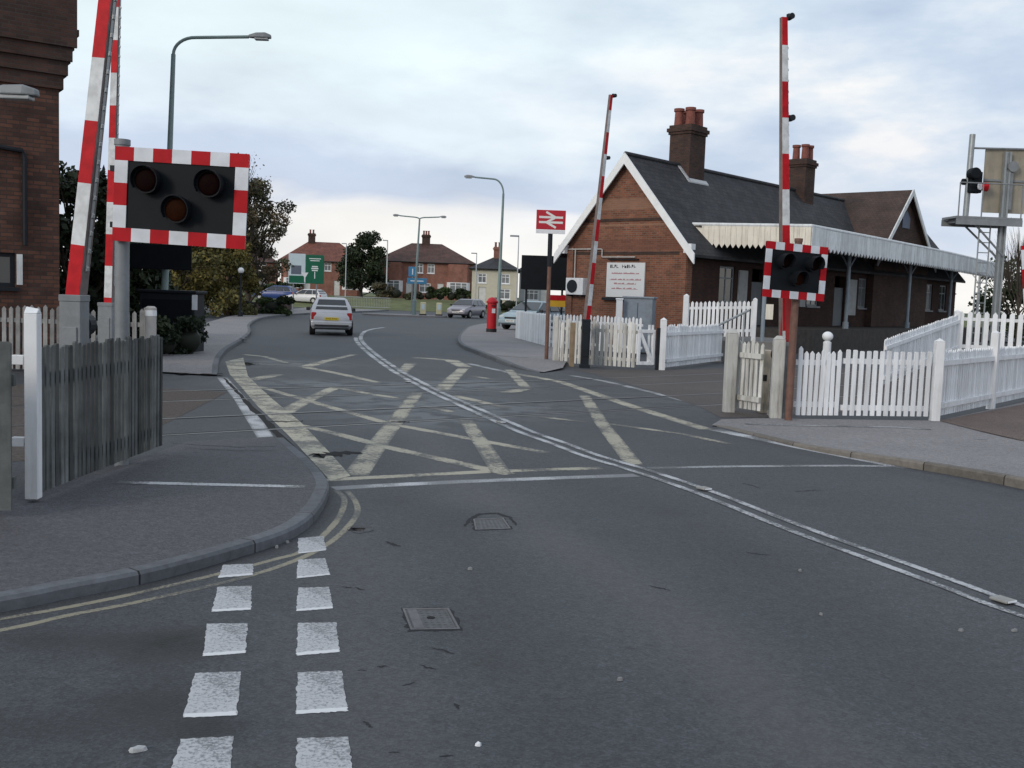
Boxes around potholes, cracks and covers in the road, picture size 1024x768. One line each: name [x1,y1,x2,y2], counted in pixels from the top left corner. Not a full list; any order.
manhole cover [471,518,513,530]
crack [402,648,455,686]
manhole cover [401,607,463,632]
